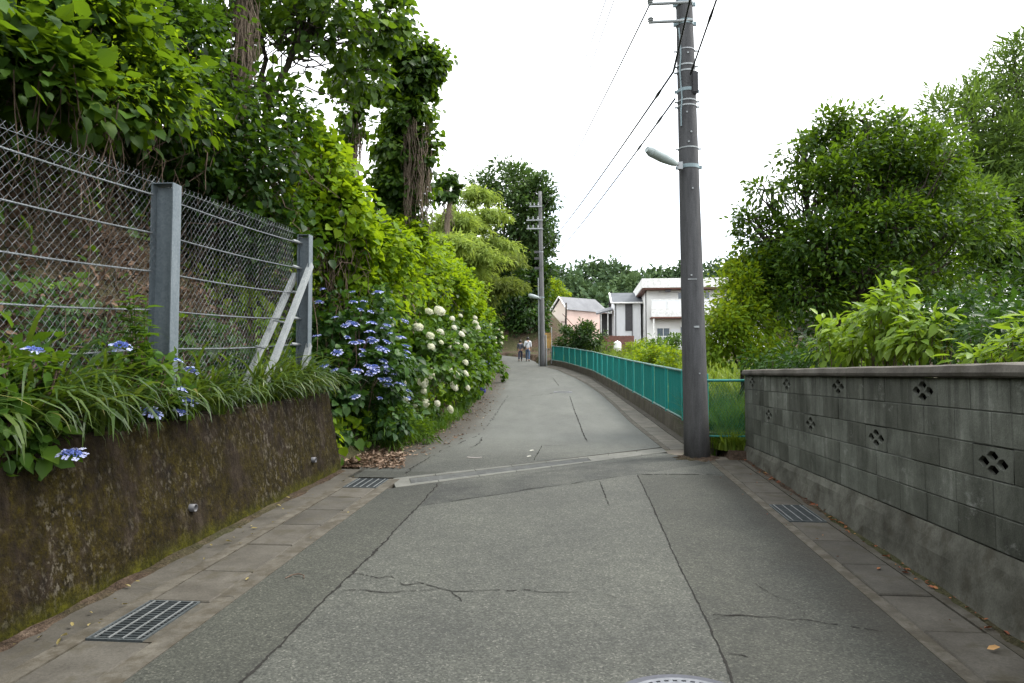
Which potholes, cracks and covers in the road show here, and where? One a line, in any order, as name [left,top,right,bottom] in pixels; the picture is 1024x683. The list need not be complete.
crack [348,573,619,601]
drain grate [85,600,200,643]
crack [713,584,883,632]
manhole cover [626,674,724,683]
drain grate [769,504,827,523]
drain grate [343,478,388,488]
